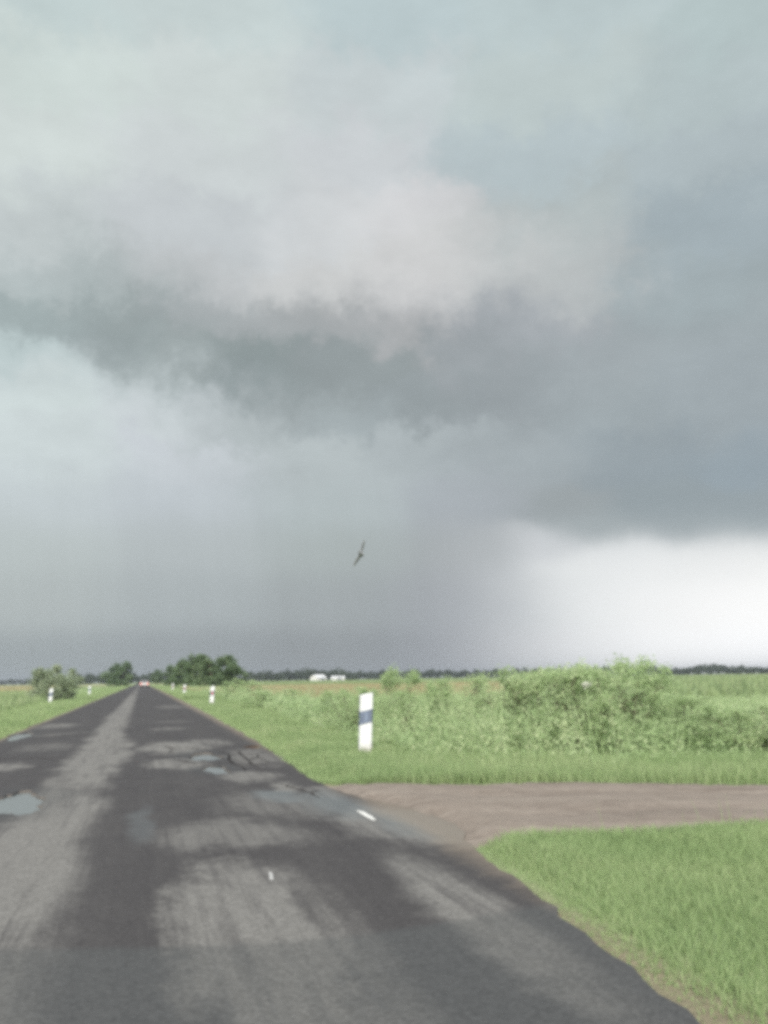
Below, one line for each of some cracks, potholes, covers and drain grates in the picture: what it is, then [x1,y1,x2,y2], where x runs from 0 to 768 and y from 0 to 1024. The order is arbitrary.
pothole [202,765,232,774]
crack [165,746,319,798]
pothole [0,790,49,815]
pothole [189,752,223,762]
